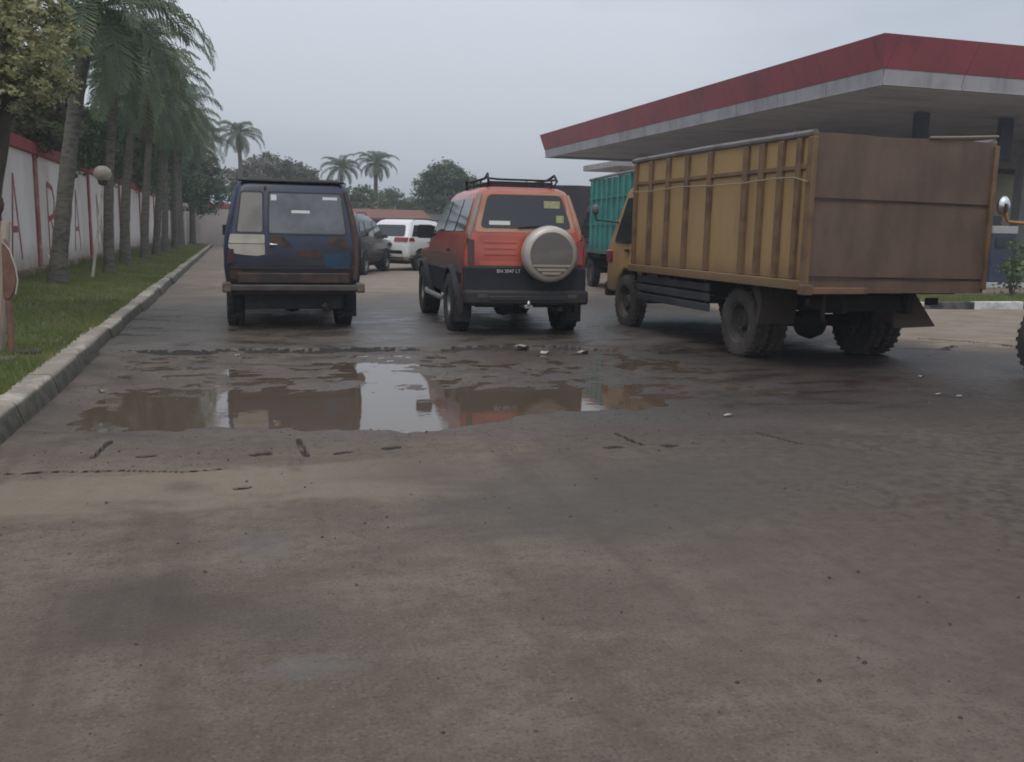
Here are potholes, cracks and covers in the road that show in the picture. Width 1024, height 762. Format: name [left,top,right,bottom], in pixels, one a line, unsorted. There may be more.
crack [602,431,672,454]
crack [742,430,815,447]
crack [283,437,322,461]
crack [0,439,241,478]
